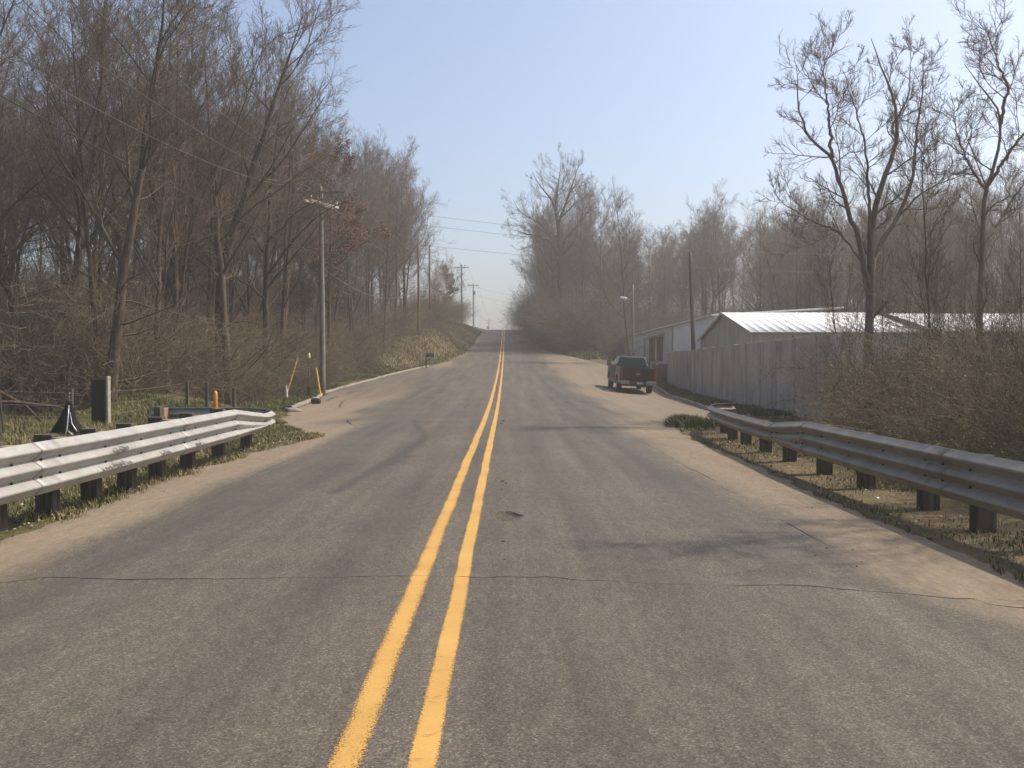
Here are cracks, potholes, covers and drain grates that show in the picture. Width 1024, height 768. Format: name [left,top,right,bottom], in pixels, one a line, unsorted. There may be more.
pothole [496,511,523,522]
crack [1,444,1024,608]
